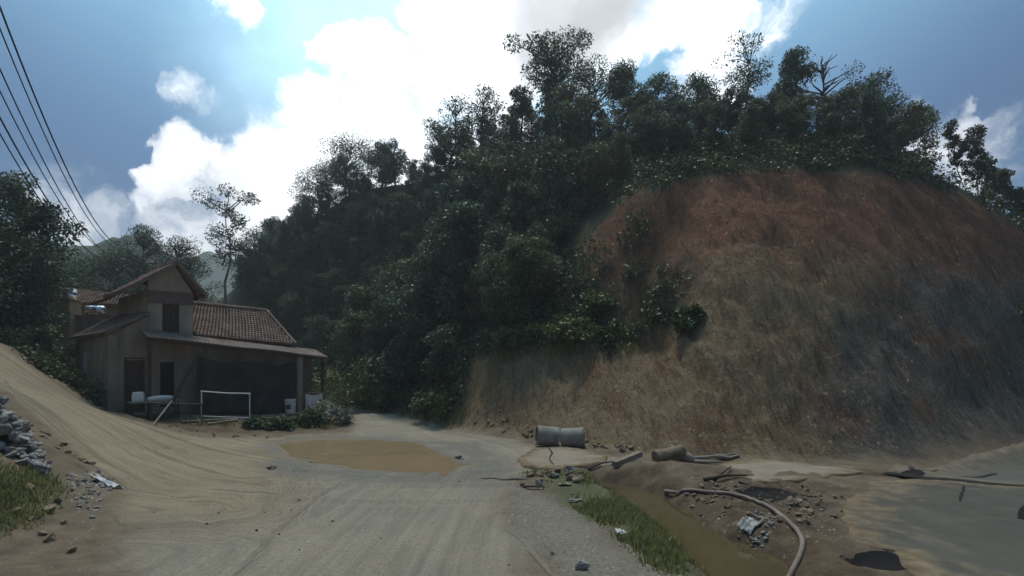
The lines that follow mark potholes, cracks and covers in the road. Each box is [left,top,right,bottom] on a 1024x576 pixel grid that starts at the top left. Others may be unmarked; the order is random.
pothole [842,551,905,571]
